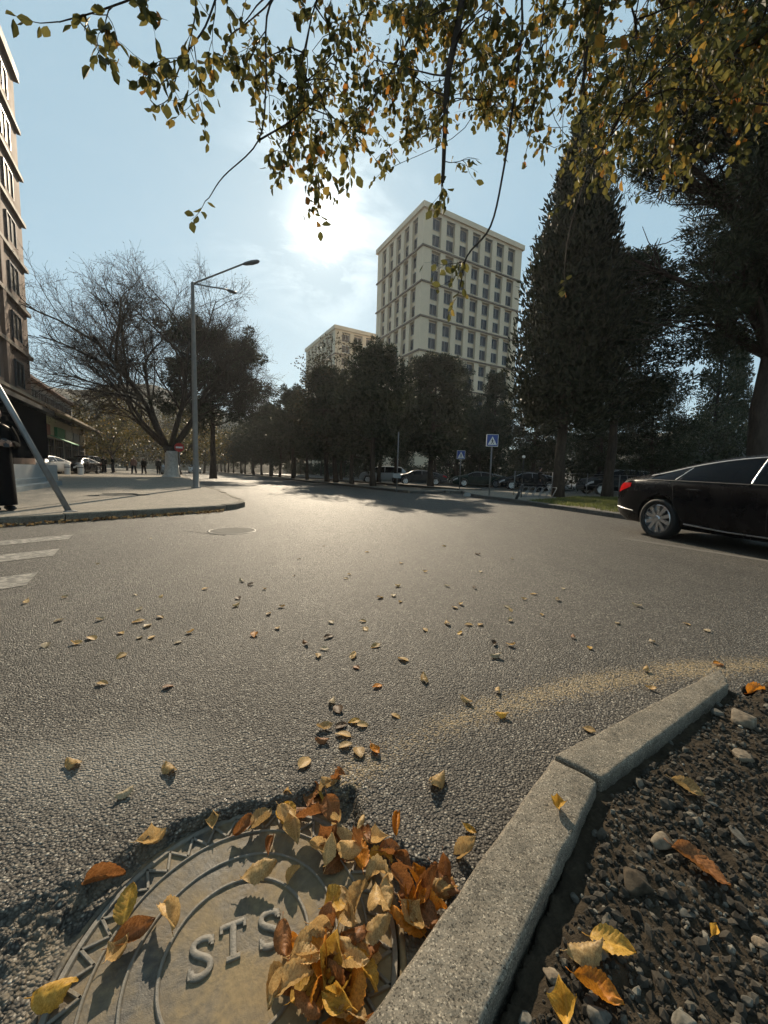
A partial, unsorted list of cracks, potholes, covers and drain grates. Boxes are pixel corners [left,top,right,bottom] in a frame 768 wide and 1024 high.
manhole cover [30,810,407,1024]
